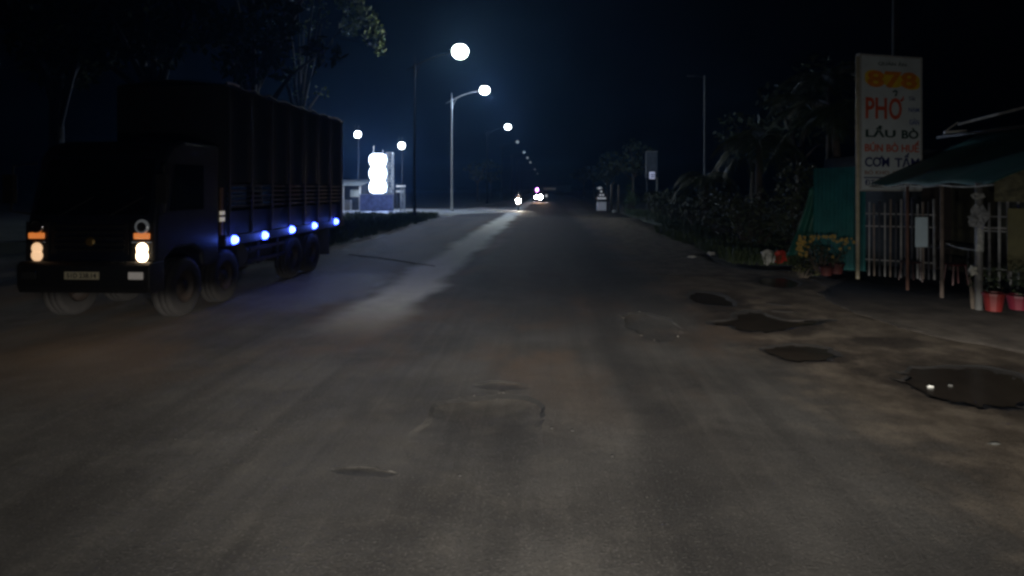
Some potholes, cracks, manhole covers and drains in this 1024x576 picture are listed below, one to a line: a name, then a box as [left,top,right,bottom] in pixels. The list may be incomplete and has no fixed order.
pothole [620,311,687,342]
pothole [684,290,738,307]
pothole [759,343,844,363]
pothole [473,381,533,390]
pothole [889,365,1024,411]
pothole [330,464,398,477]
pothole [705,310,838,333]
